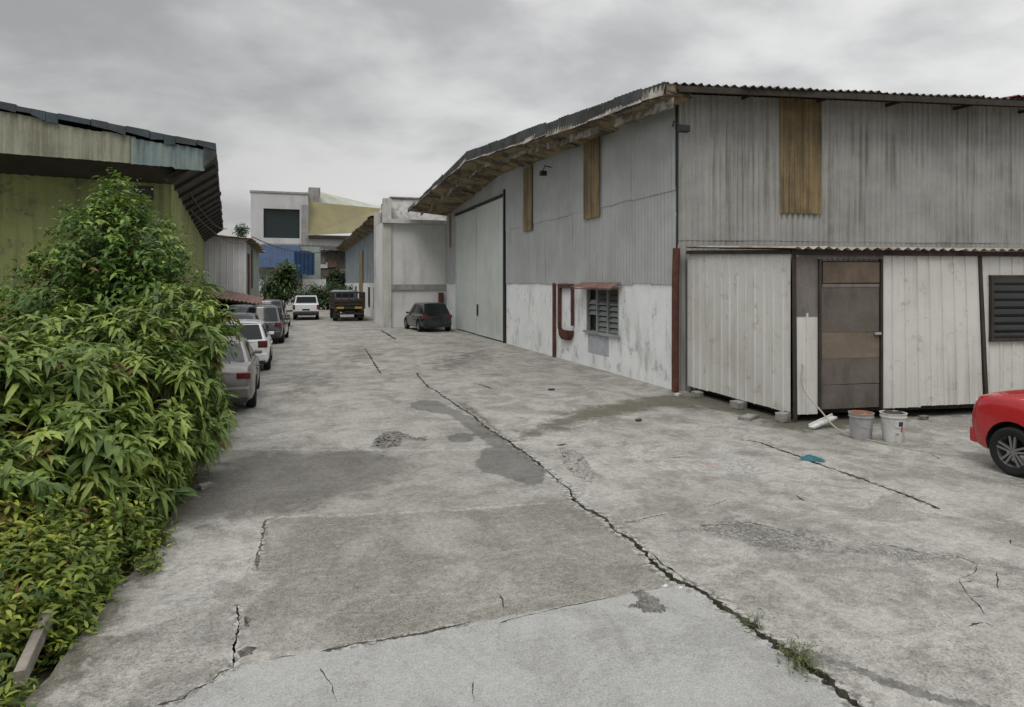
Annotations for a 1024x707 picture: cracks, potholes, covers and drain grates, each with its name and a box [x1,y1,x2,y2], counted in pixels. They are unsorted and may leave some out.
pothole [370,431,428,449]
crack [255,520,266,569]
crack [152,668,232,707]
crack [319,623,465,702]
crack [748,440,939,509]
crack [416,373,863,707]
pothole [625,590,667,614]
